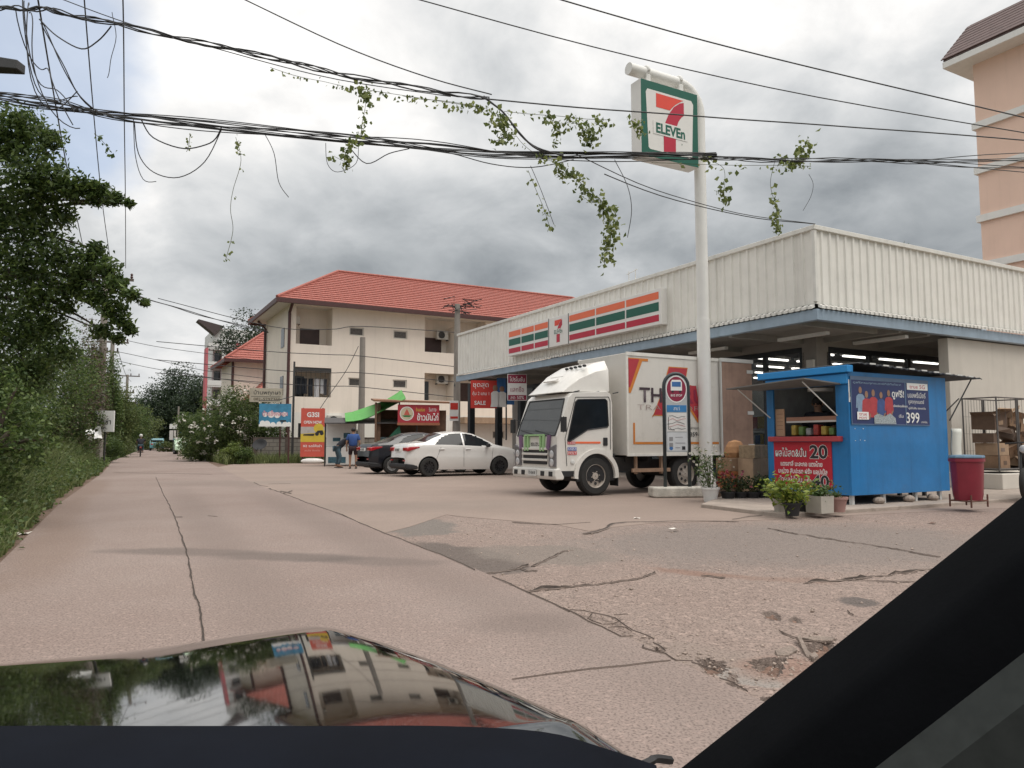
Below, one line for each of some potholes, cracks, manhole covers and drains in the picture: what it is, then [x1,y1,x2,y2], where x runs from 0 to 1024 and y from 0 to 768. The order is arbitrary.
crack [402,515,763,692]
crack [803,569,931,584]
crack [156,477,217,641]
pothole [795,642,837,658]
pothole [746,656,789,677]
pothole [695,657,729,675]
crack [779,630,837,642]
